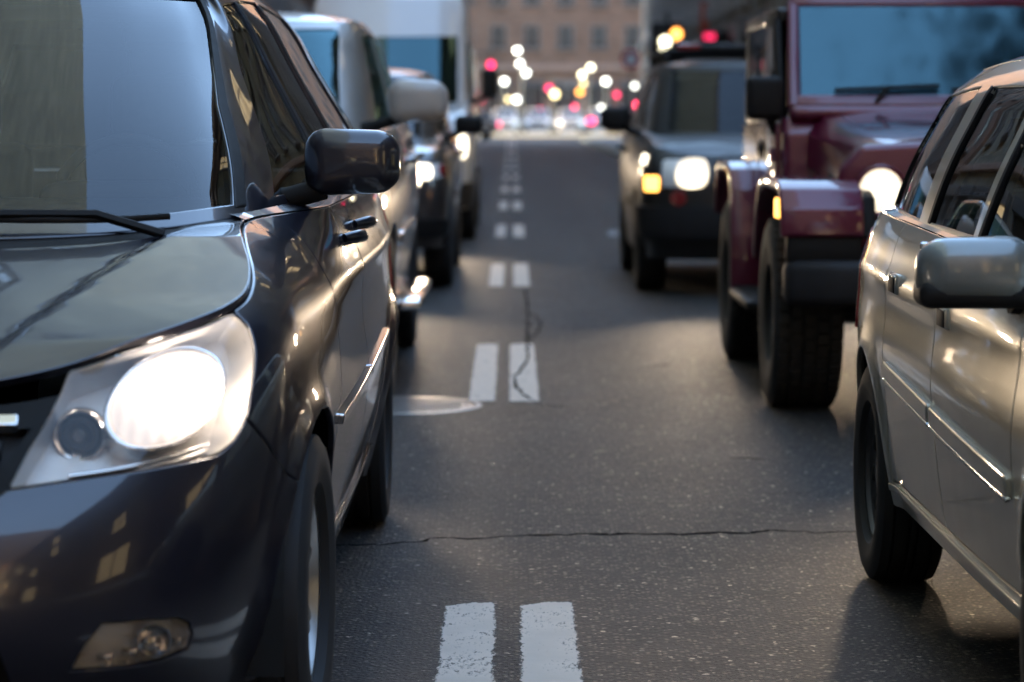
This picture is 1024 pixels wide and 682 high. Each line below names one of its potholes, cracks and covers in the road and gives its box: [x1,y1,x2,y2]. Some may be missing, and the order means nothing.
crack [513,289,564,407]
manhole cover [393,396,483,415]
crack [342,530,856,546]
